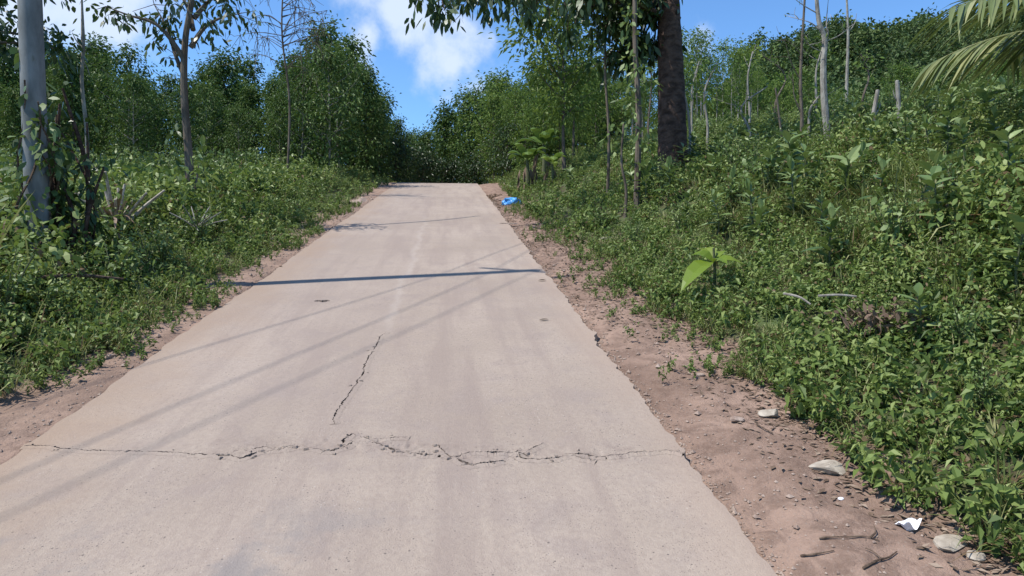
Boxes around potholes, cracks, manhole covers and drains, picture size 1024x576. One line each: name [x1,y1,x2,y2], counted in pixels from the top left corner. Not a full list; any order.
crack [20,332,684,469]
